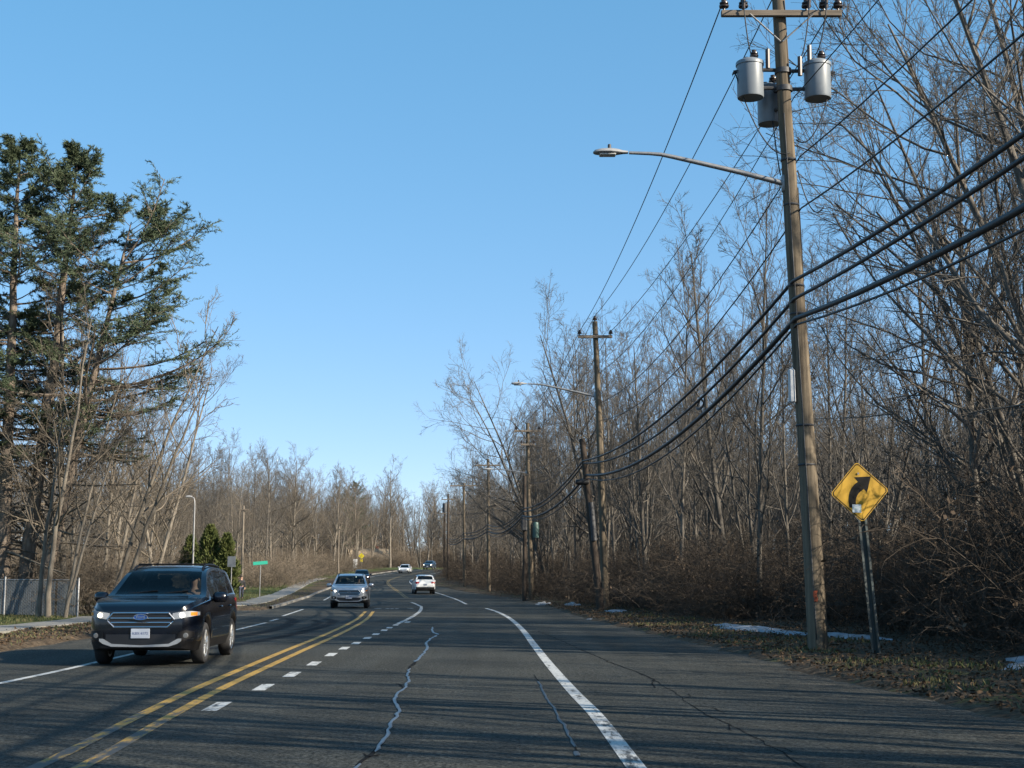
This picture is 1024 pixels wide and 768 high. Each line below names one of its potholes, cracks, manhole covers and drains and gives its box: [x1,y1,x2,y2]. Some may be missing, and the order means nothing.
crack [538,631,806,768]
